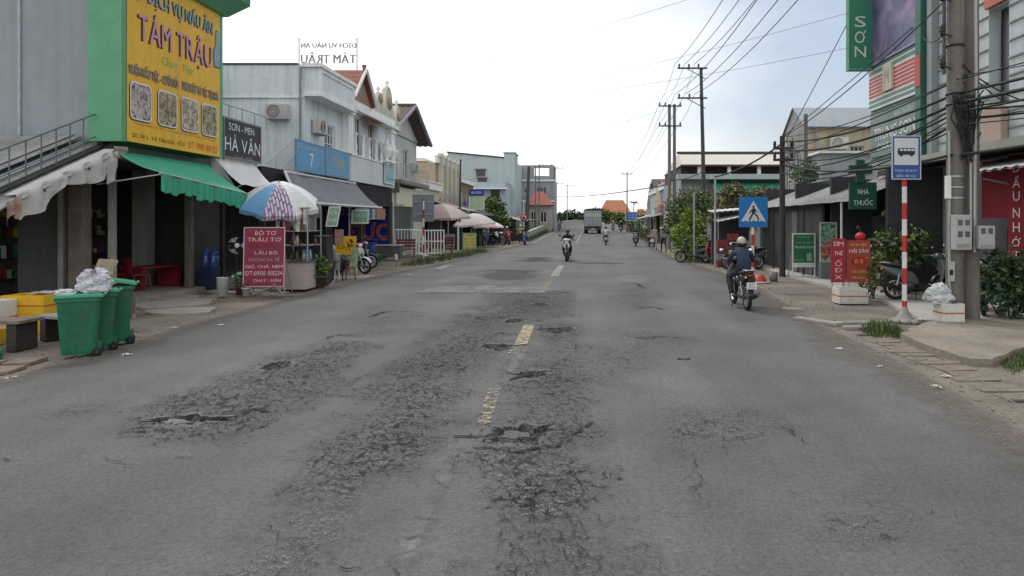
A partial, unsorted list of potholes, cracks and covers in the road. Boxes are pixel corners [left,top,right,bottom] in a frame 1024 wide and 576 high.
pothole [129,412,245,426]
pothole [251,360,297,371]
pothole [502,369,552,379]
crack [445,314,686,576]
pothole [469,420,566,445]
crack [116,289,575,576]
crack [668,410,762,490]
